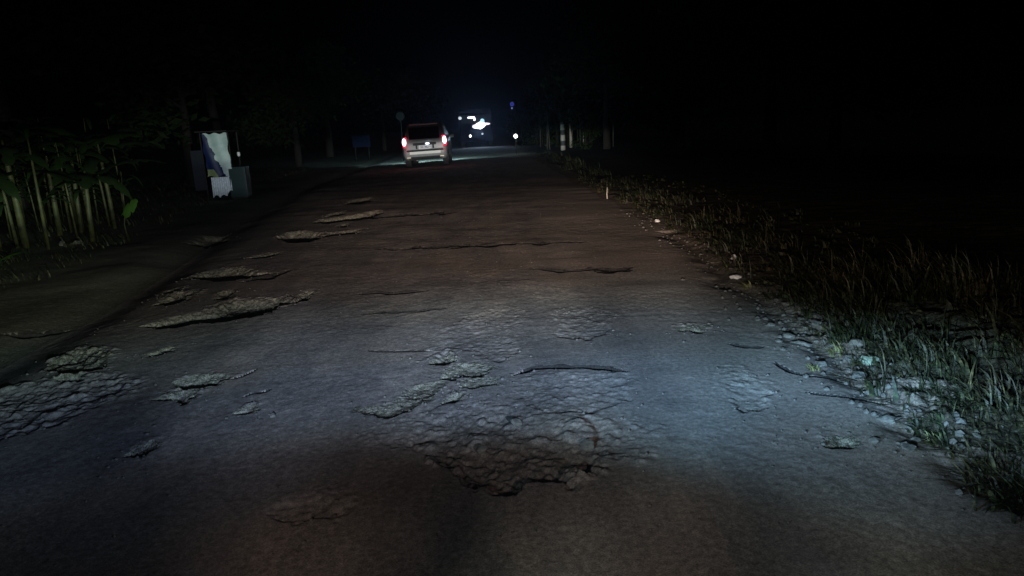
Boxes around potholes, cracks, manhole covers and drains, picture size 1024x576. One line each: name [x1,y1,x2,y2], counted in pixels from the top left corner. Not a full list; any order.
pothole [172,373,232,391]
pothole [152,388,201,406]
pothole [294,291,316,303]
pothole [439,361,499,381]
pothole [401,380,448,399]
pothole [213,290,239,300]
pothole [274,230,323,243]
crack [730,344,868,402]
pothole [344,197,377,205]
pothole [439,392,467,405]
pothole [723,368,777,414]
